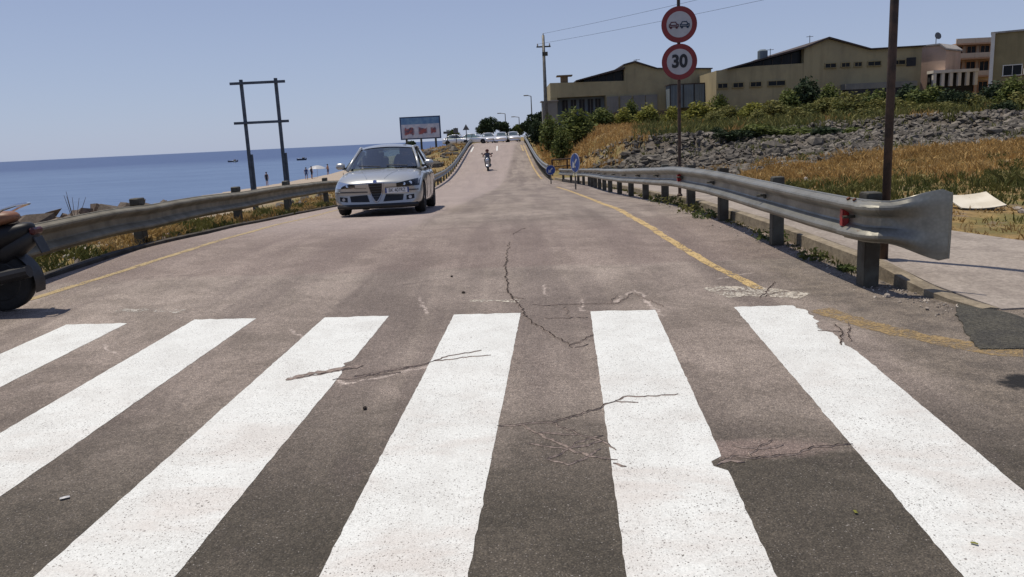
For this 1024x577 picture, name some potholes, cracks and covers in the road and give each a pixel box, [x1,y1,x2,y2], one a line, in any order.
crack [818,323,853,345]
crack [497,393,678,467]
crack [285,228,664,381]
